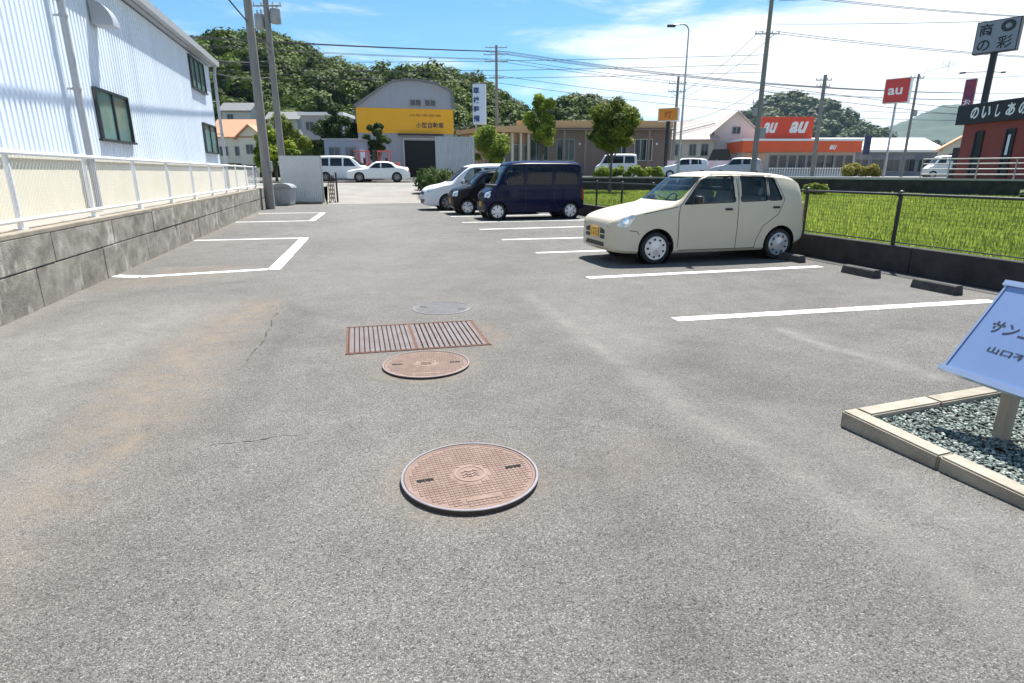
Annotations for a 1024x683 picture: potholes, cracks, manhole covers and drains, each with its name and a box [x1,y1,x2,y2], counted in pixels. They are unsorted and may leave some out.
manhole cover [400,443,539,516]
manhole cover [382,350,470,380]
drain grate [345,320,492,355]
crack [187,433,308,456]
manhole cover [413,302,471,315]
